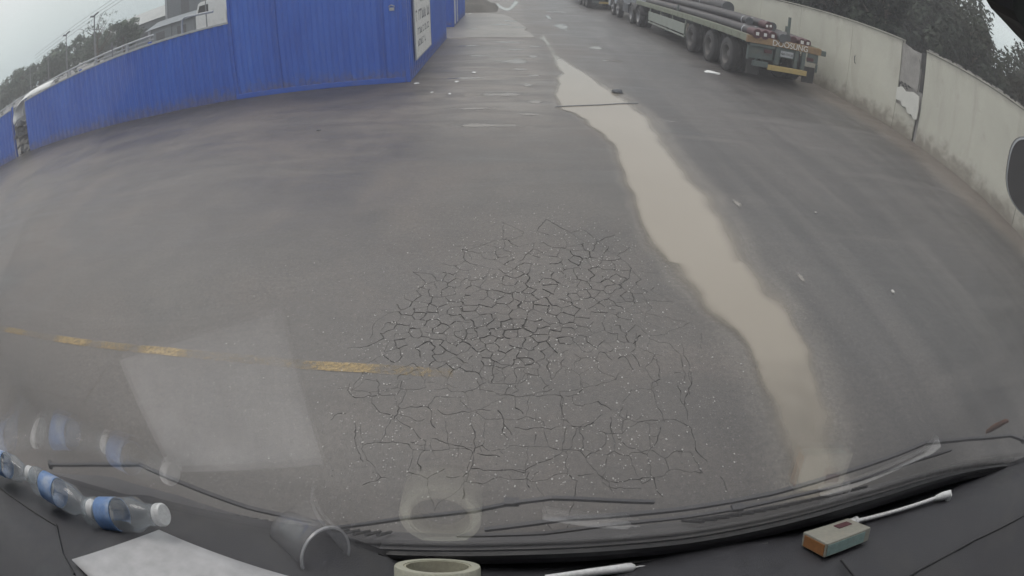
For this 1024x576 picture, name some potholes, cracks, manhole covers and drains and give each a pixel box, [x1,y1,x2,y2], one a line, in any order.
crack [331,219,727,527]
